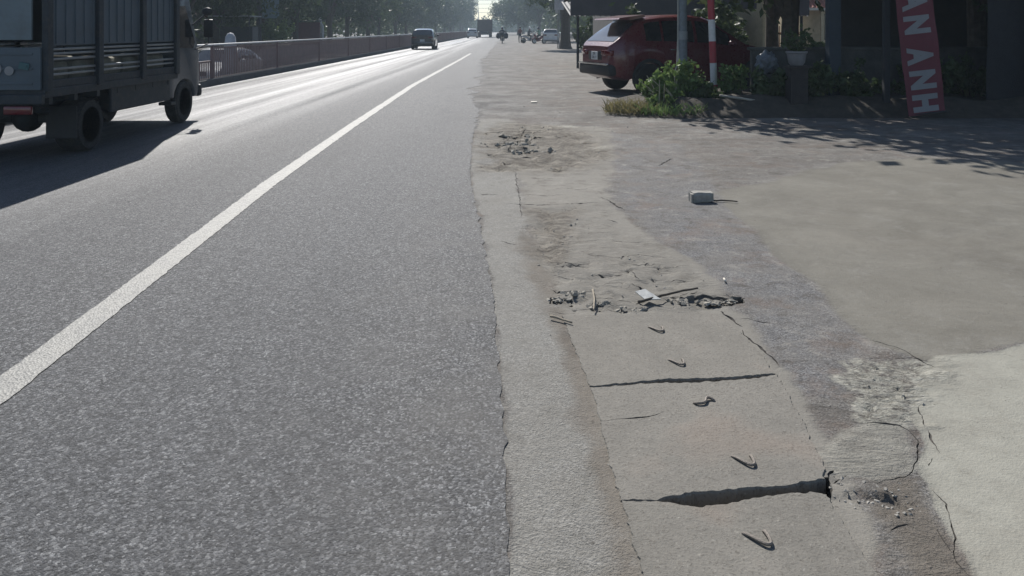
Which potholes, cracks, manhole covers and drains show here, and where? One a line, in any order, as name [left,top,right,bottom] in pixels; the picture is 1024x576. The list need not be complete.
crack [856,407,969,576]
crack [824,470,846,500]
crack [488,128,607,196]
crack [866,338,933,367]
